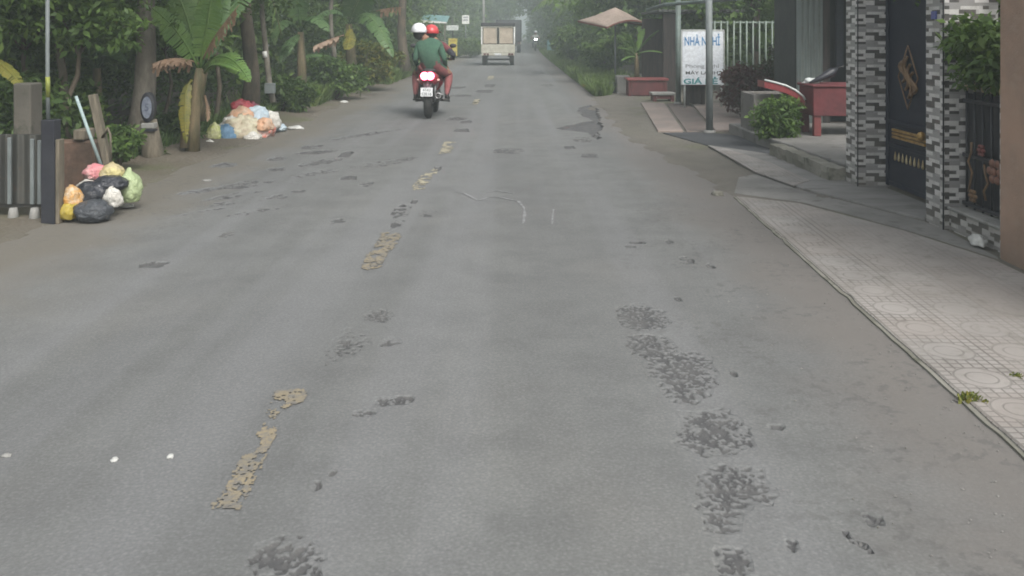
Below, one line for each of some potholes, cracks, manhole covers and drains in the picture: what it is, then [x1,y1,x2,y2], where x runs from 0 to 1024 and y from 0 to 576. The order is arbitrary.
pothole [370,395,415,407]
pothole [242,531,328,576]
pothole [710,544,755,576]
pothole [614,303,673,331]
pothole [670,406,759,458]
pothole [351,408,379,417]
pothole [692,463,780,535]
pothole [363,309,394,324]
pothole [389,204,412,218]
pothole [322,326,374,366]
pothole [621,334,720,406]
pothole [557,105,604,140]
